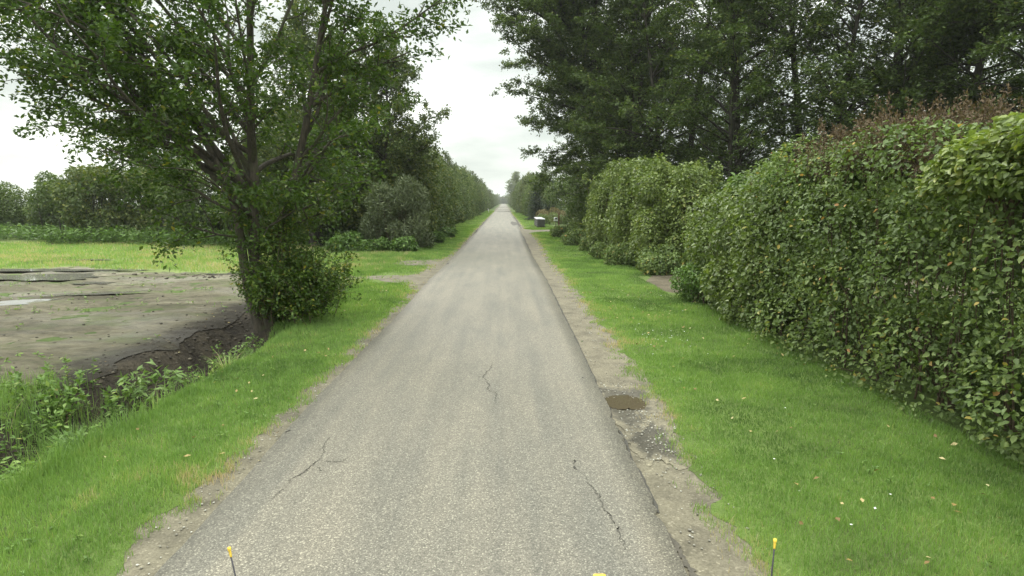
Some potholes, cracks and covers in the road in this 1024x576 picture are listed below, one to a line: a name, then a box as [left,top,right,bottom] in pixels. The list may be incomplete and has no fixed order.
pothole [598,385,665,432]
crack [574,461,632,557]
pothole [623,410,692,470]
crack [274,437,348,497]
